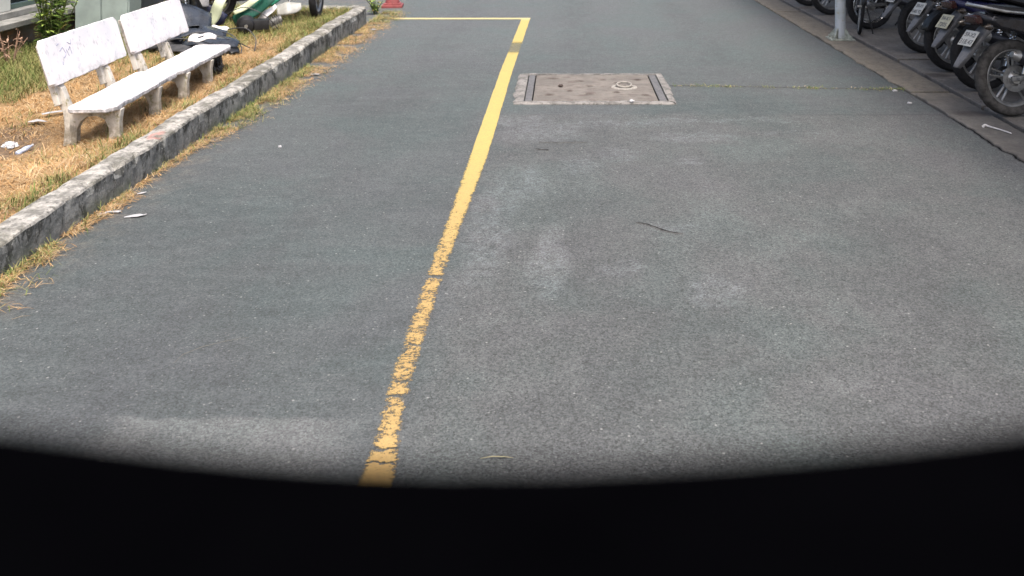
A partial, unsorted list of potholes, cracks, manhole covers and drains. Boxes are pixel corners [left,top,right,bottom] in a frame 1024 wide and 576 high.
manhole cover [513,73,677,105]
